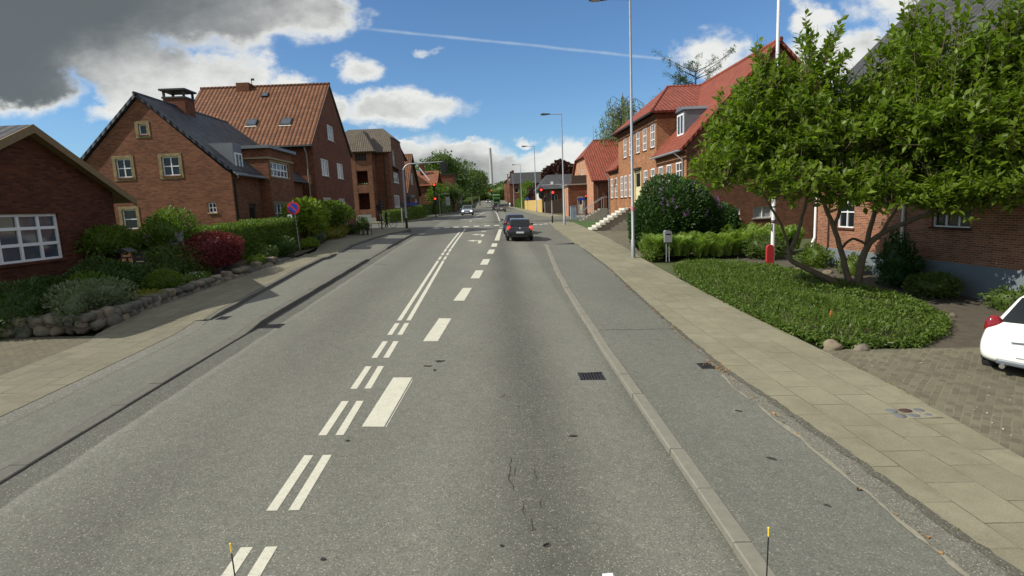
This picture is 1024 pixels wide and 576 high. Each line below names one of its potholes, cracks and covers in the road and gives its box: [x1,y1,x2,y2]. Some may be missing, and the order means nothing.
crack [508,458,541,532]
utility cover [885,407,943,419]
